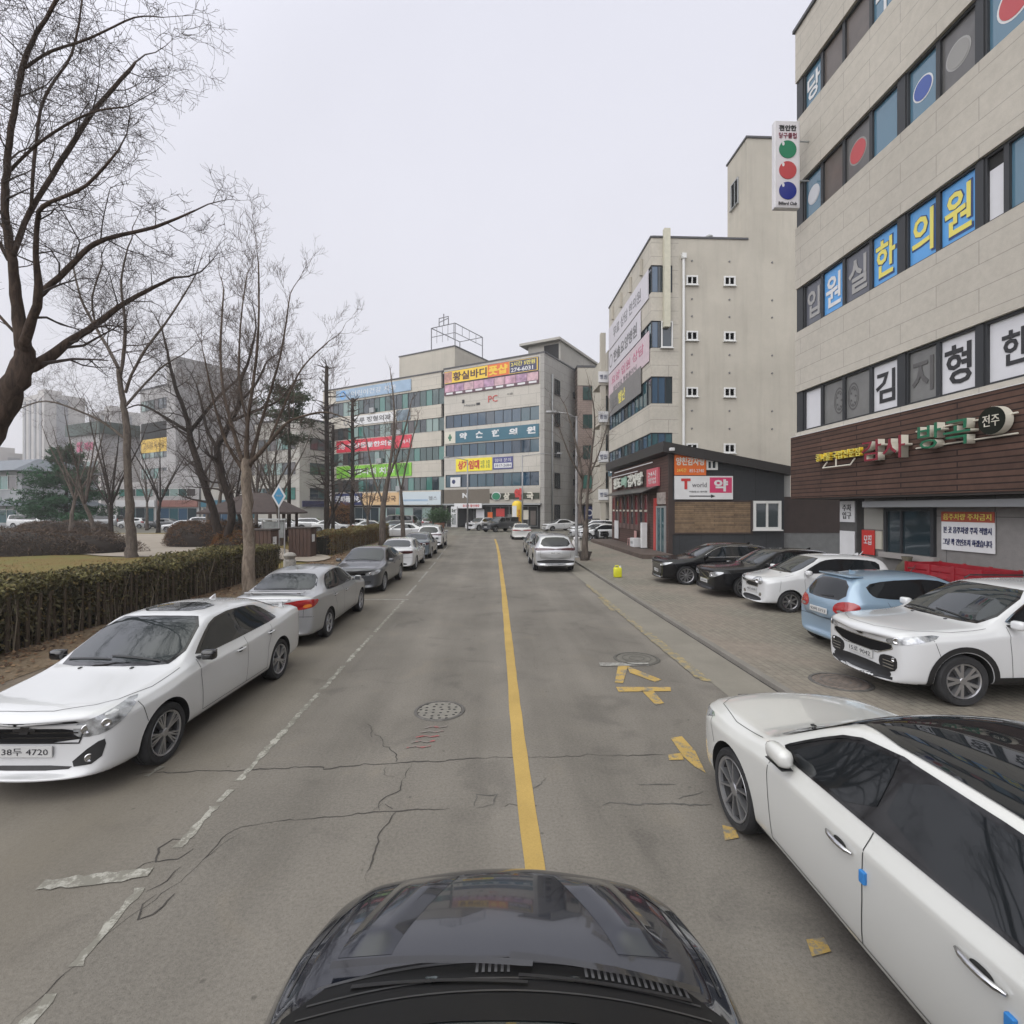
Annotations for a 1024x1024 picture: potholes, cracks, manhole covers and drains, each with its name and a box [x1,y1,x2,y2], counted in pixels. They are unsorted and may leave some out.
manhole cover [613,652,660,666]
crack [602,784,711,806]
crack [12,724,663,1022]
manhole cover [808,672,875,692]
manhole cover [414,701,465,721]
